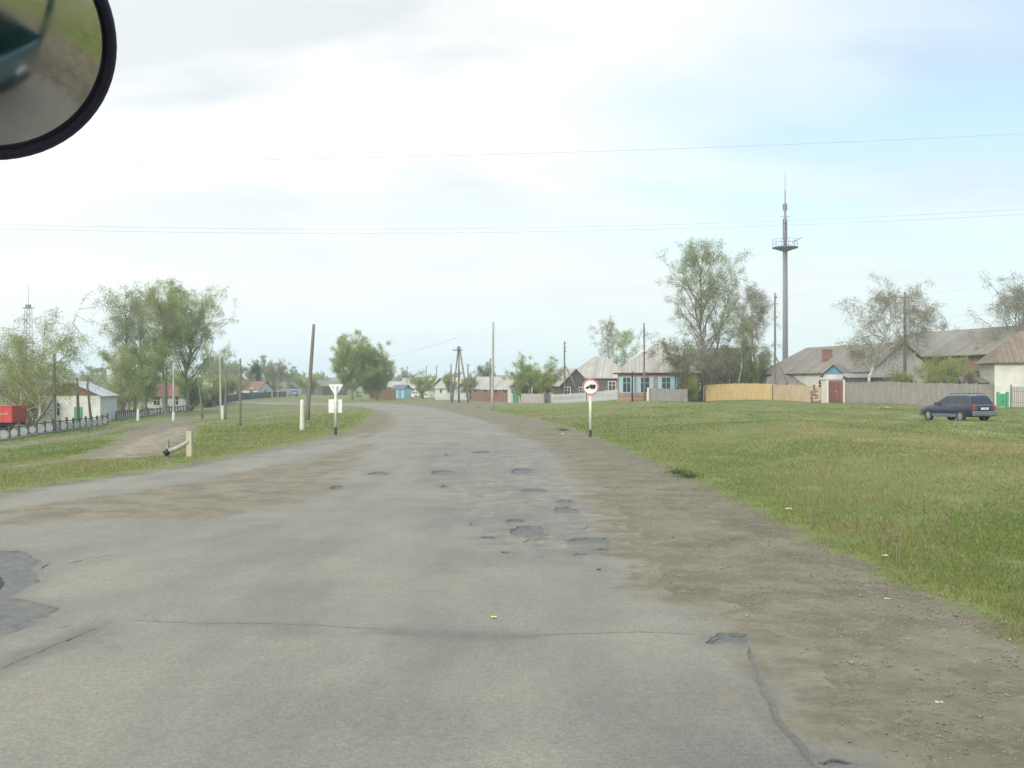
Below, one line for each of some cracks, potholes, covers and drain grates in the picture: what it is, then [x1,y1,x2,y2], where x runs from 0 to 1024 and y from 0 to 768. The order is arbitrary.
crack [747,646,814,766]
crack [4,625,96,668]
pothole [705,633,750,645]
pothole [510,526,549,538]
crack [129,619,379,630]
